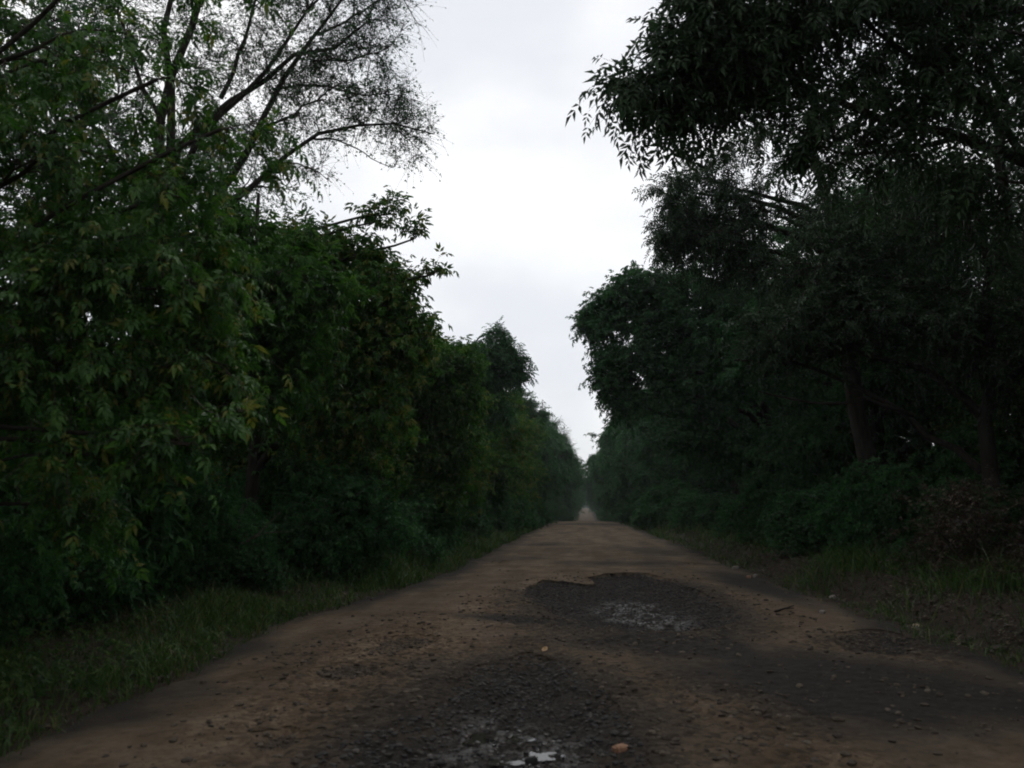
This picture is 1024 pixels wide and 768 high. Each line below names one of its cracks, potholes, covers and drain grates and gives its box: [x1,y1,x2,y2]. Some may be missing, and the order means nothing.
pothole [519,572,746,632]
pothole [304,652,656,768]
